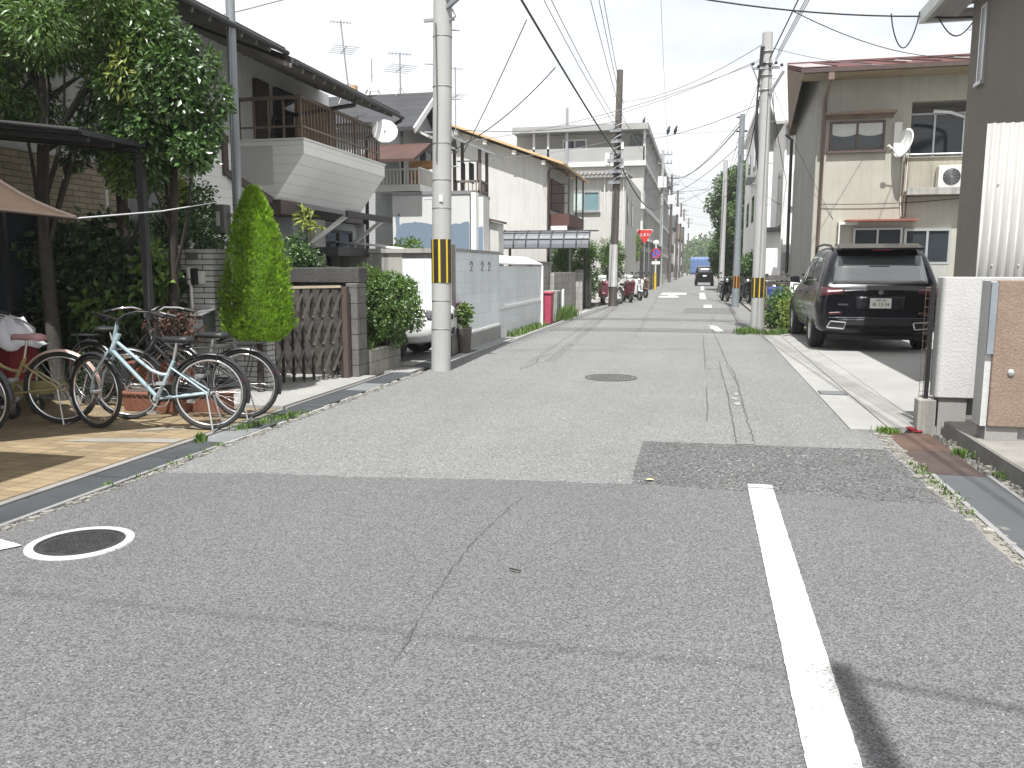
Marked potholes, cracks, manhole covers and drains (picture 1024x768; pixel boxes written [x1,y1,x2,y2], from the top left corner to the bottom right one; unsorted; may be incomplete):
manhole cover [23,526,135,561]
crack [394,498,522,660]
crack [703,314,754,442]
